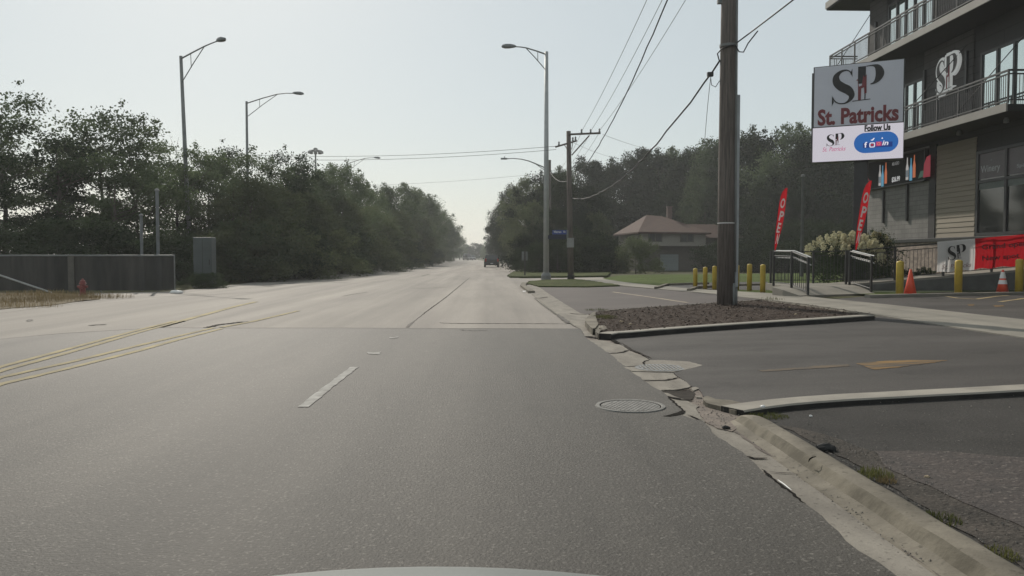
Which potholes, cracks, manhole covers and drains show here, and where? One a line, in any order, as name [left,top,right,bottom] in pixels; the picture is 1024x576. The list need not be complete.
crack [747,456,816,504]
manhole cover [595,399,666,413]
